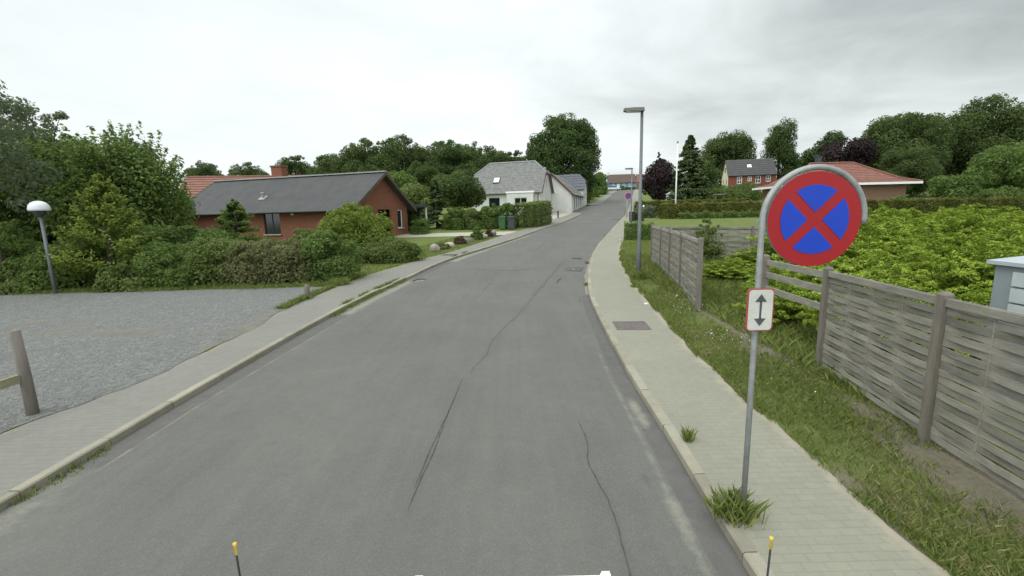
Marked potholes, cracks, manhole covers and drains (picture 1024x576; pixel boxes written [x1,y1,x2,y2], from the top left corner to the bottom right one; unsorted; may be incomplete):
manhole cover [612,321,652,330]
crack [580,425,632,576]
crack [409,382,461,507]
